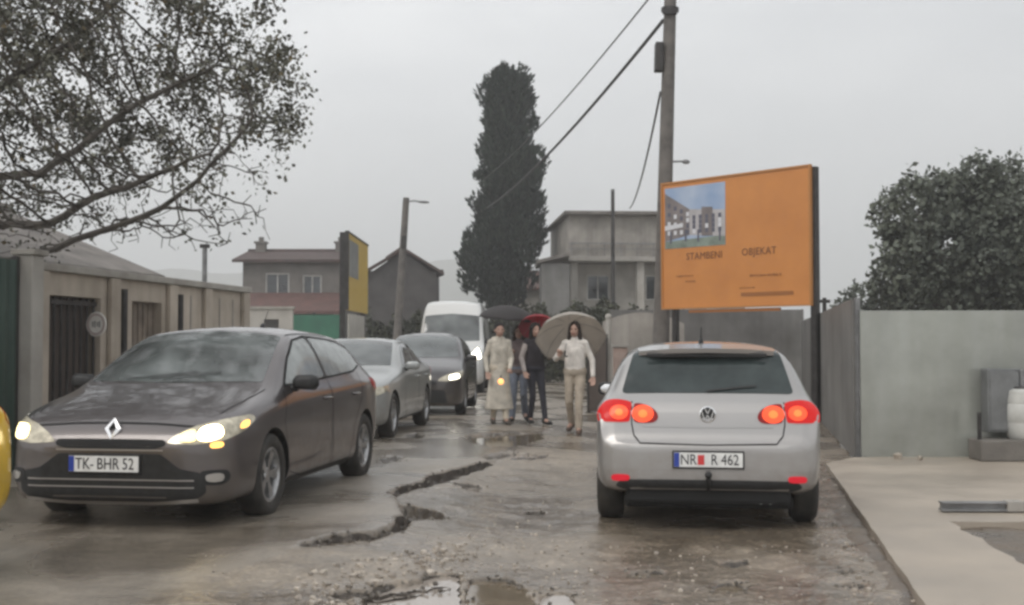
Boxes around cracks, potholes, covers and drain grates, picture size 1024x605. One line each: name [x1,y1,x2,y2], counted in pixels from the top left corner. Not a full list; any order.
pothole [362,571,470,605]
pothole [535,587,577,605]
pothole [461,430,549,447]
pothole [465,574,536,605]
crack [301,516,410,547]
crack [386,461,493,497]
